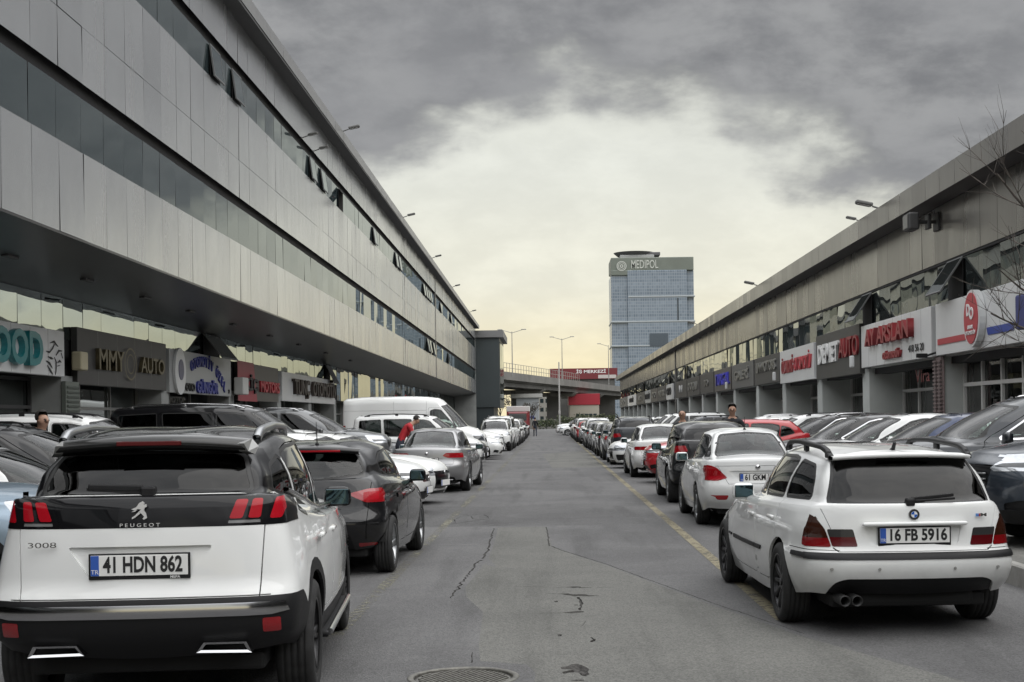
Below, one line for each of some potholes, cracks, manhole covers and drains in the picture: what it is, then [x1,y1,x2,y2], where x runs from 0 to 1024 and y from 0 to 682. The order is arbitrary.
crack [436,514,494,598]
manhole cover [407,667,519,682]
